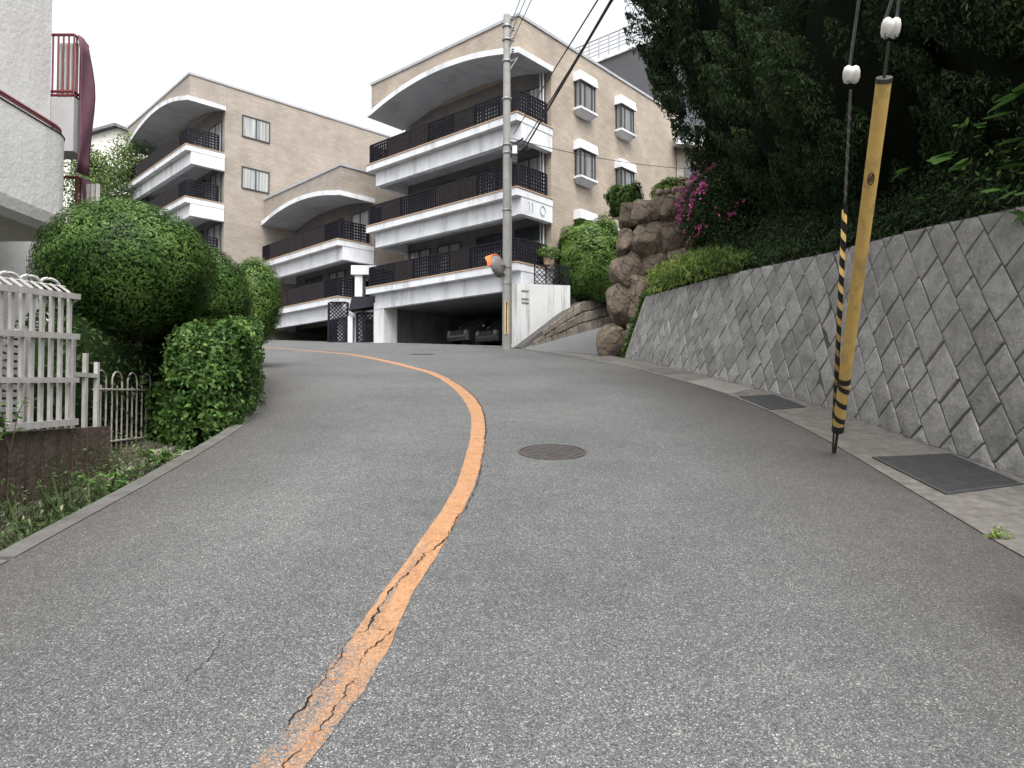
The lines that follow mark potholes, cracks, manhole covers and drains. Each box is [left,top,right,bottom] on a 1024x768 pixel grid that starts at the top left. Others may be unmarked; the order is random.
drain grate [872,453,1024,495]
manhole cover [518,444,587,460]
drain grate [739,394,806,410]
